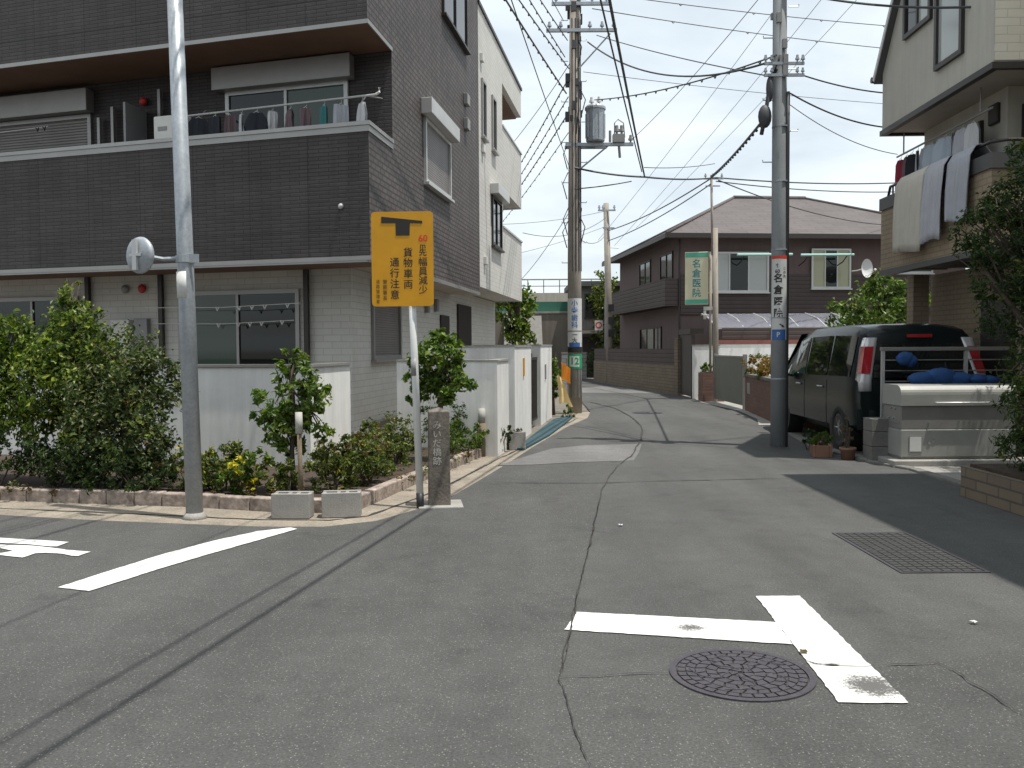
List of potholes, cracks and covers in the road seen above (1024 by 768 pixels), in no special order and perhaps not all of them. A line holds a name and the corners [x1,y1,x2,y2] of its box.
crack [807,660,1022,713]
crack [500,402,768,765]
manhole cover [669,648,816,703]
